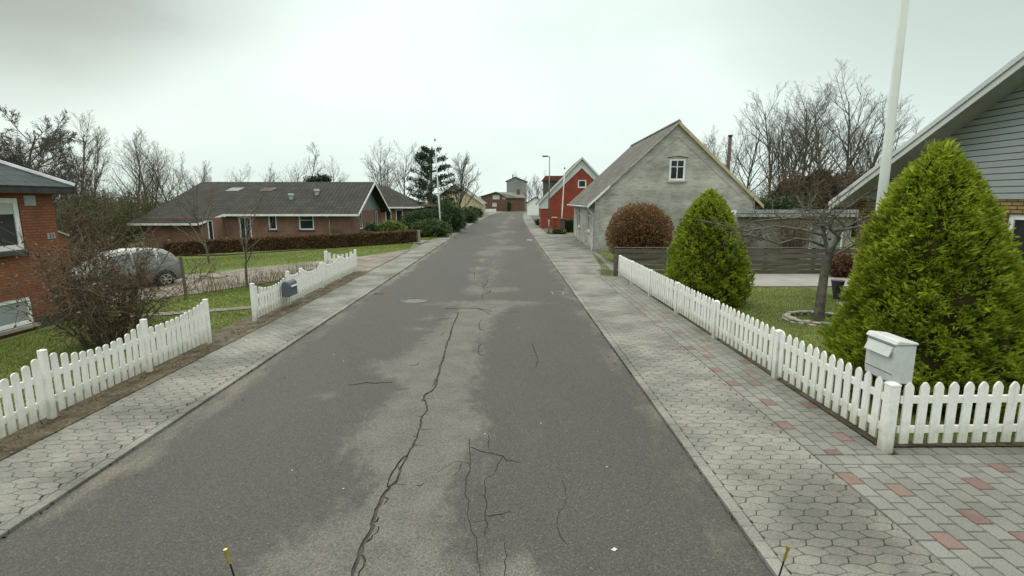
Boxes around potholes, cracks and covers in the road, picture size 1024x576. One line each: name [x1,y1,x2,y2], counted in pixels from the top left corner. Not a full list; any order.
crack [351,266,521,576]
